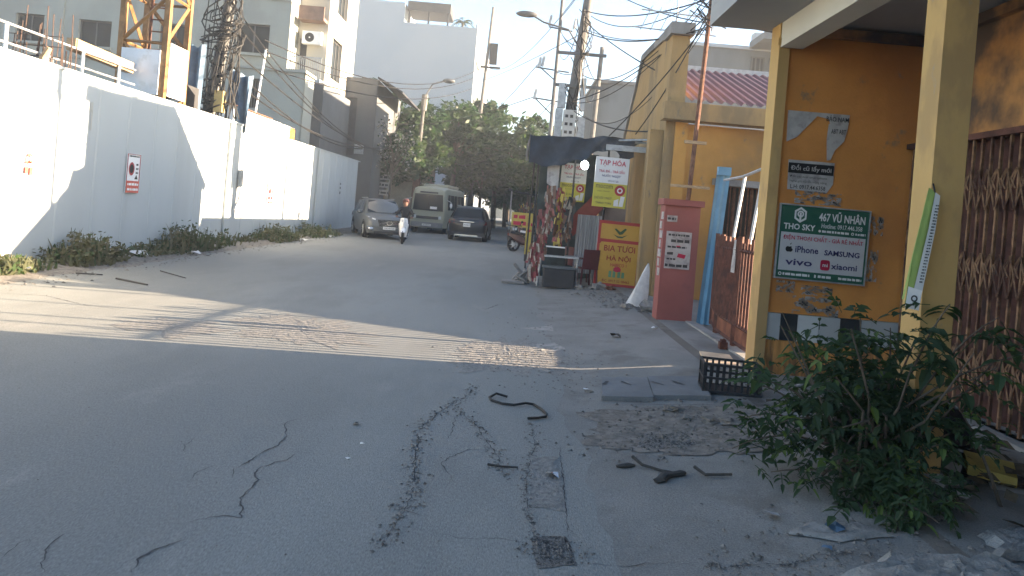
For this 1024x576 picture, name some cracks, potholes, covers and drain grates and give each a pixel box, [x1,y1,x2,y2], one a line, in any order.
crack [376,386,511,548]
crack [4,534,64,570]
crack [131,540,181,572]
crack [186,416,307,523]
